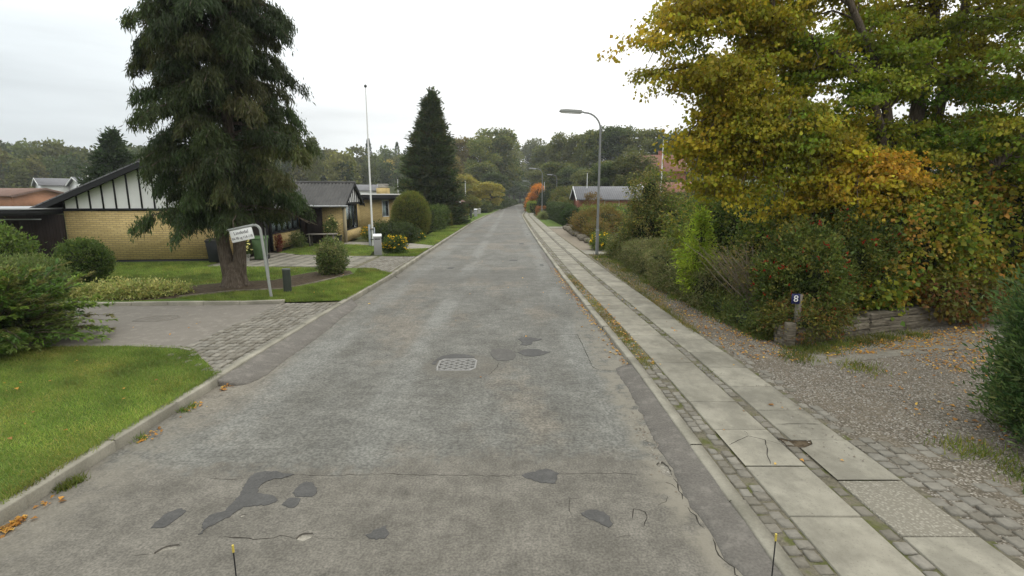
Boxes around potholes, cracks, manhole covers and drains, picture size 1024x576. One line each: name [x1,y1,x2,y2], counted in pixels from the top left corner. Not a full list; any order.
drain grate [436,358,477,371]
